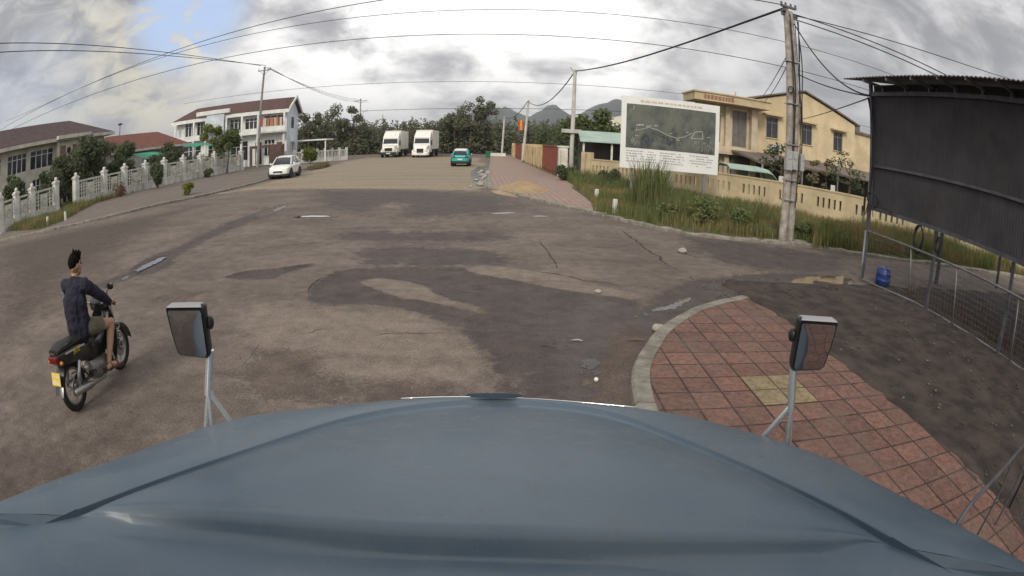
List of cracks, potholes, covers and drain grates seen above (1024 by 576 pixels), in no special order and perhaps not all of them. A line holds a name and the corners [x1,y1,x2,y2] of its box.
crack [596,231,703,270]
crack [537,242,621,286]
